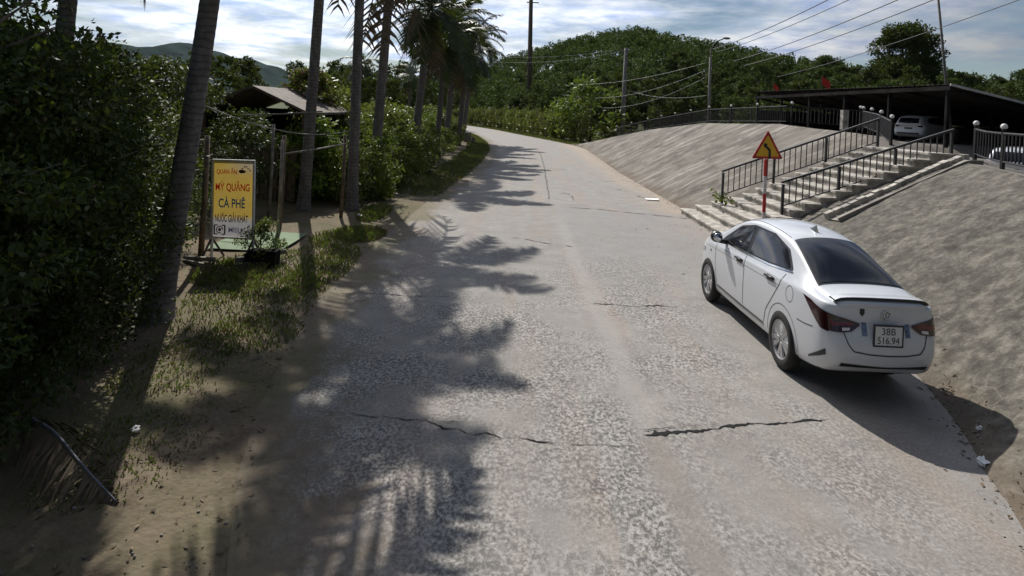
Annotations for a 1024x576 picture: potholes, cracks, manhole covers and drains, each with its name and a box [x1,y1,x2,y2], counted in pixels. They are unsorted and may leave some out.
crack [353,413,826,446]
